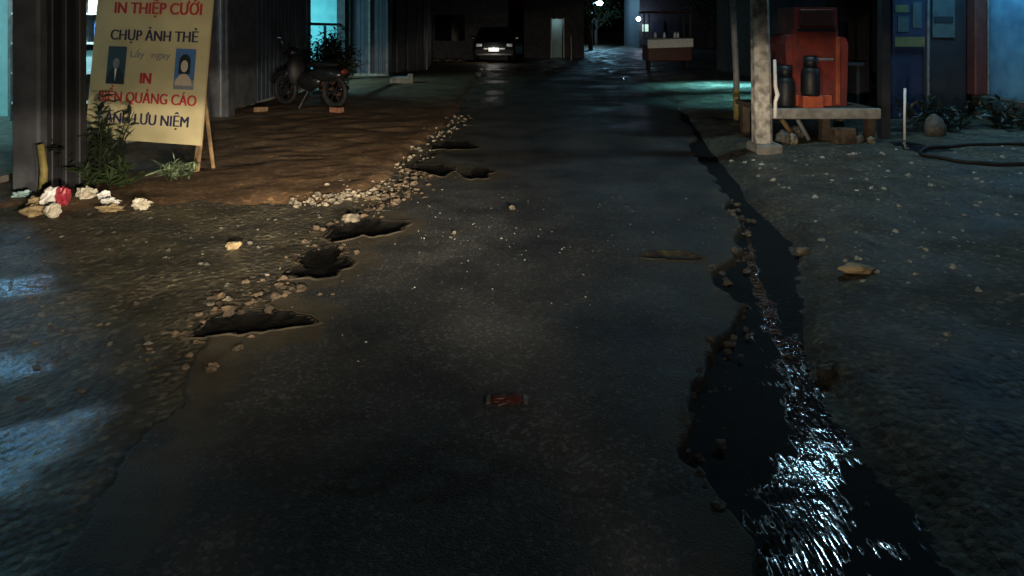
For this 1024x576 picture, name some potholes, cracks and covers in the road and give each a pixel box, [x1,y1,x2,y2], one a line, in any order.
pothole [426,140,481,150]
pothole [278,243,359,281]
pothole [318,217,415,244]
pothole [457,167,497,180]
pothole [405,163,457,178]
pothole [177,307,324,340]
